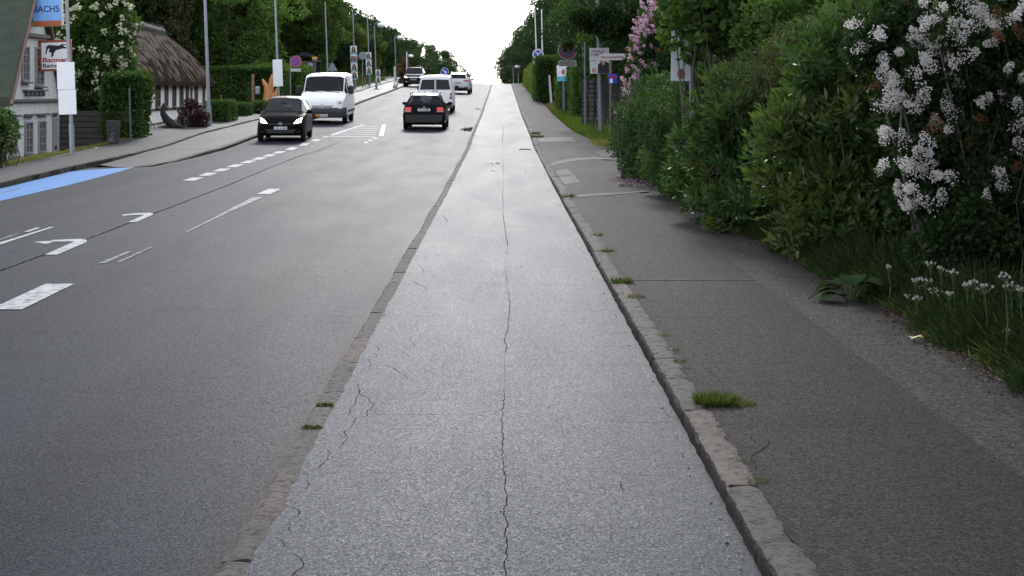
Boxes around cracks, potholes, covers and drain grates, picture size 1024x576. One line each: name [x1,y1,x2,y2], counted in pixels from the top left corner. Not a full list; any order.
crack [494,126,526,576]
crack [751,437,787,471]
crack [271,505,304,576]
crack [305,319,440,489]
